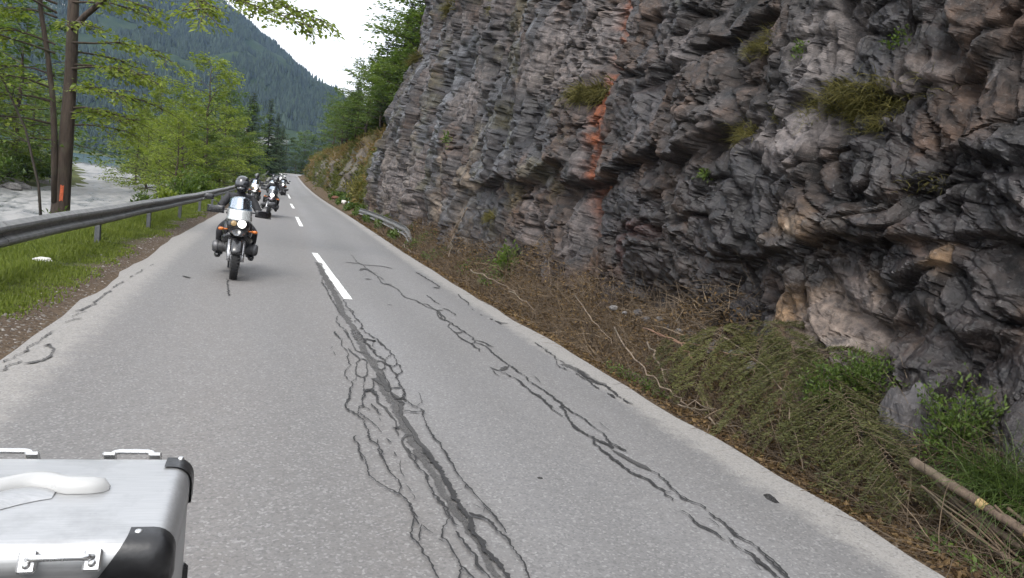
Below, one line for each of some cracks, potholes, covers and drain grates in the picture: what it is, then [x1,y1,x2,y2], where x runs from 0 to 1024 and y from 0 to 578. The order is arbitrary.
crack [315,259,790,578]
crack [2,264,153,370]
